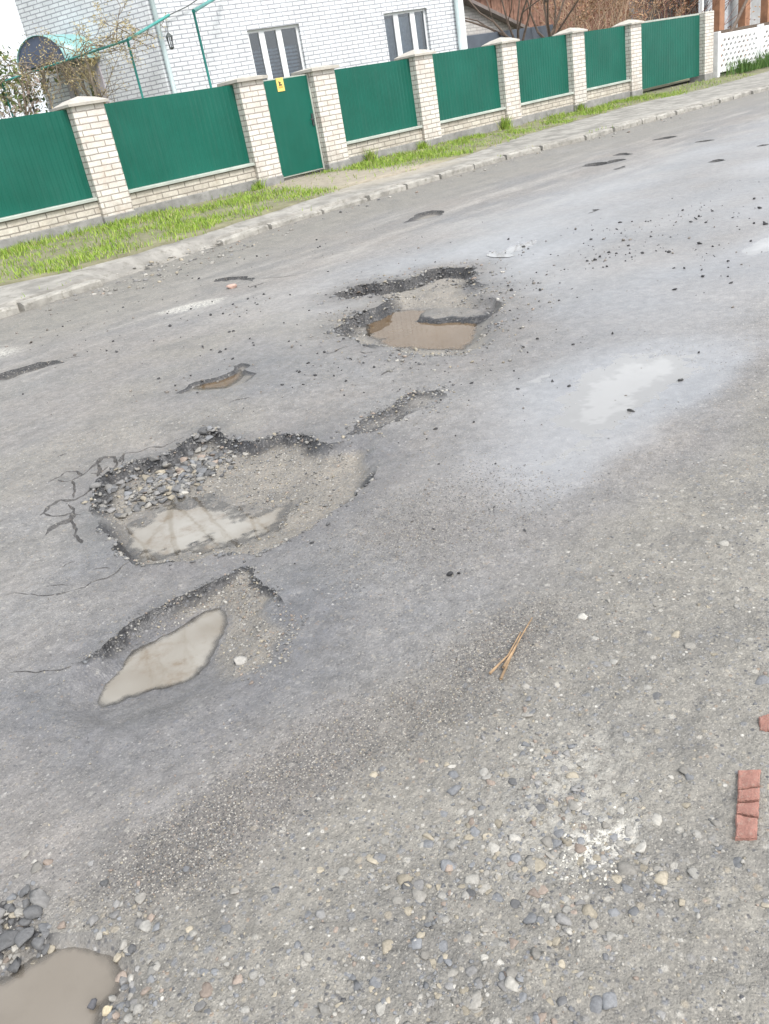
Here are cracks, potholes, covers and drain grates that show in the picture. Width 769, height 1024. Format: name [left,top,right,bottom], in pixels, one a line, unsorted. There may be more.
pothole [177,363,257,394]
pothole [0,360,65,382]
pothole [333,267,510,360]
crack [40,437,184,543]
pothole [404,210,444,223]
pothole [38,566,307,742]
pothole [346,390,447,435]
pothole [89,431,380,566]
pothole [0,901,143,1024]
crack [7,561,130,596]
